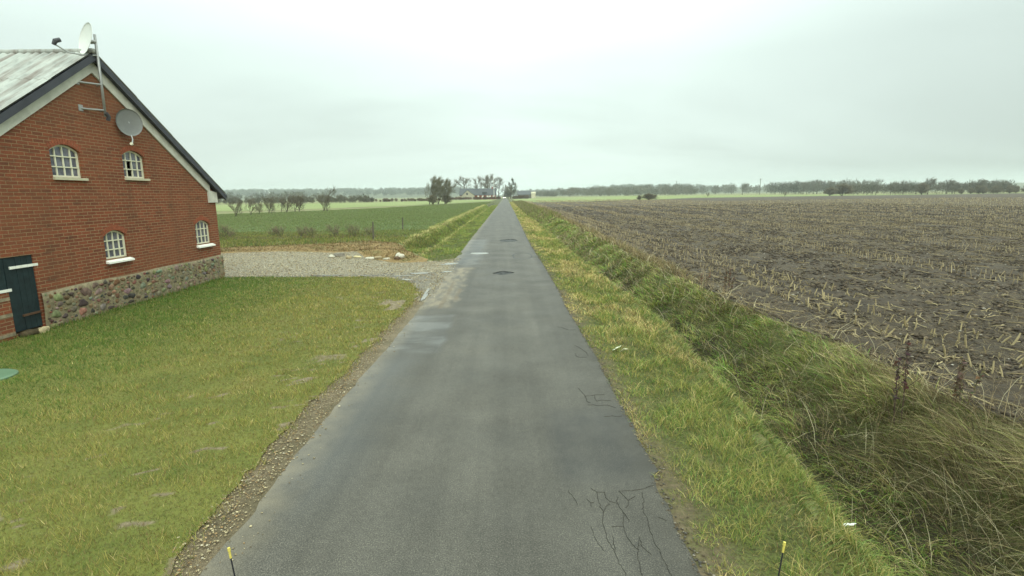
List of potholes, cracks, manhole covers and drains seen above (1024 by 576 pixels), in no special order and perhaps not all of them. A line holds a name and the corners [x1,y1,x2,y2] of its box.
crack [568,484,672,576]
